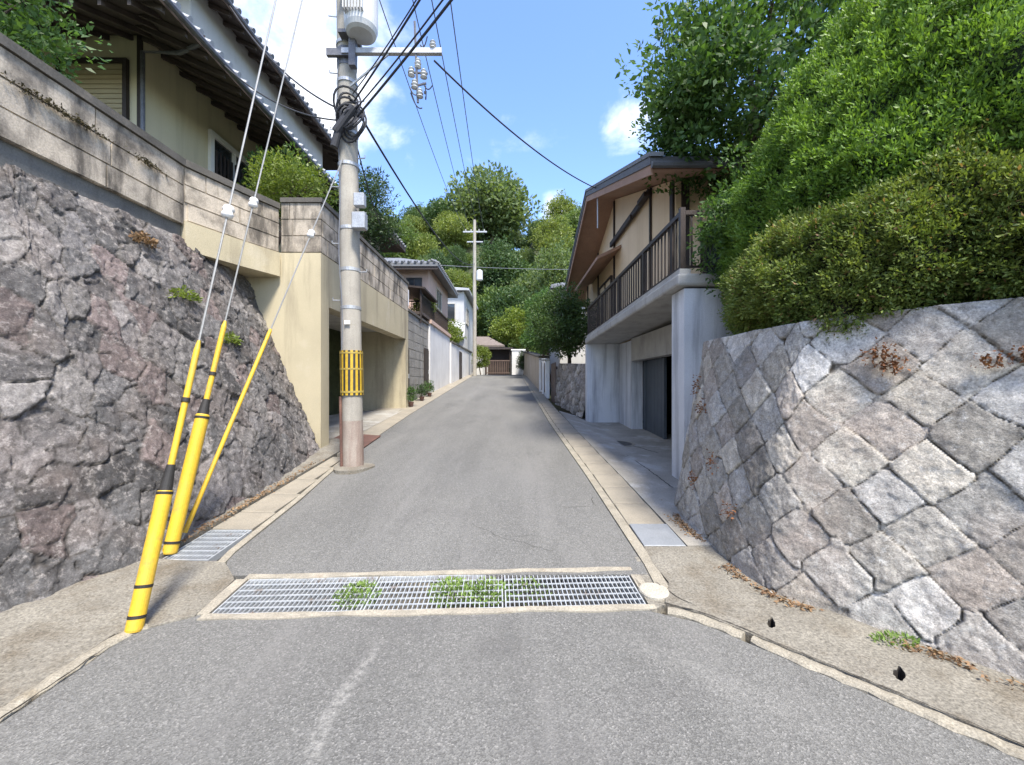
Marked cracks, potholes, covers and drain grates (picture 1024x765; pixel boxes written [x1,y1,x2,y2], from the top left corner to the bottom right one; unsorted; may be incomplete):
drain grate [163,530,252,561]
drain grate [504,575,646,607]
drain grate [213,577,379,614]
drain grate [363,575,503,610]
